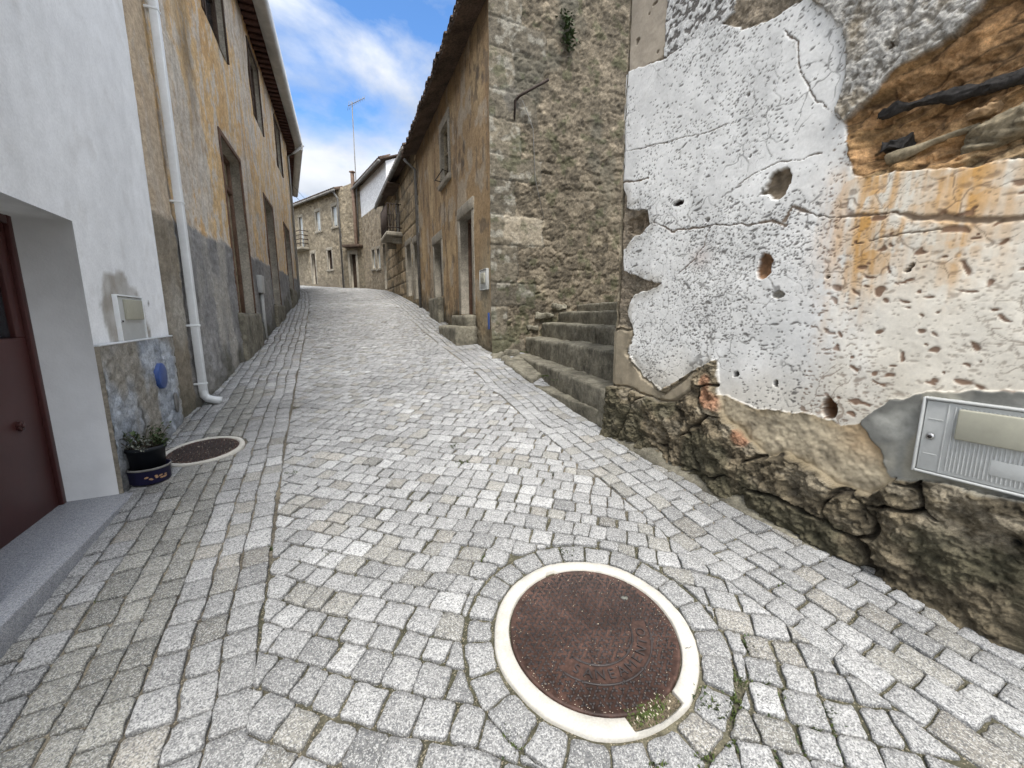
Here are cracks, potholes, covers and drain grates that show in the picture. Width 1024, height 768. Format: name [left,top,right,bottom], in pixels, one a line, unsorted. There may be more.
manhole cover [166,436,245,468]
manhole cover [494,562,699,743]
